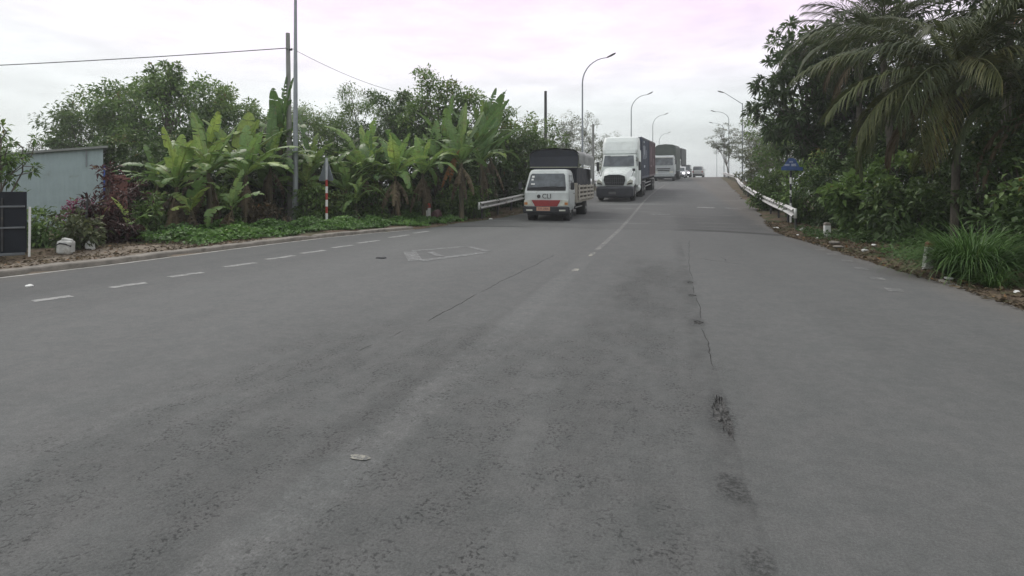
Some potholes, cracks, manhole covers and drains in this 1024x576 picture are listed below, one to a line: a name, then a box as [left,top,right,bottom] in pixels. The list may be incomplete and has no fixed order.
pothole [711,395,735,441]
